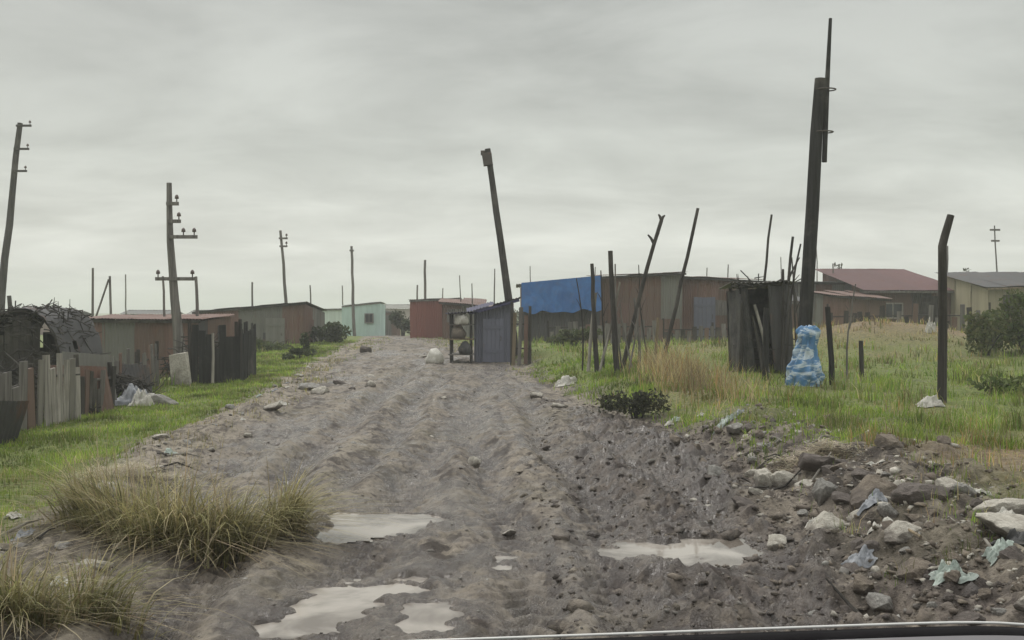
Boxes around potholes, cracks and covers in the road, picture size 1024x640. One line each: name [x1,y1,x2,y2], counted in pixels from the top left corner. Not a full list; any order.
pothole [299,505,469,548]
pothole [233,563,468,640]
pothole [577,525,782,575]
